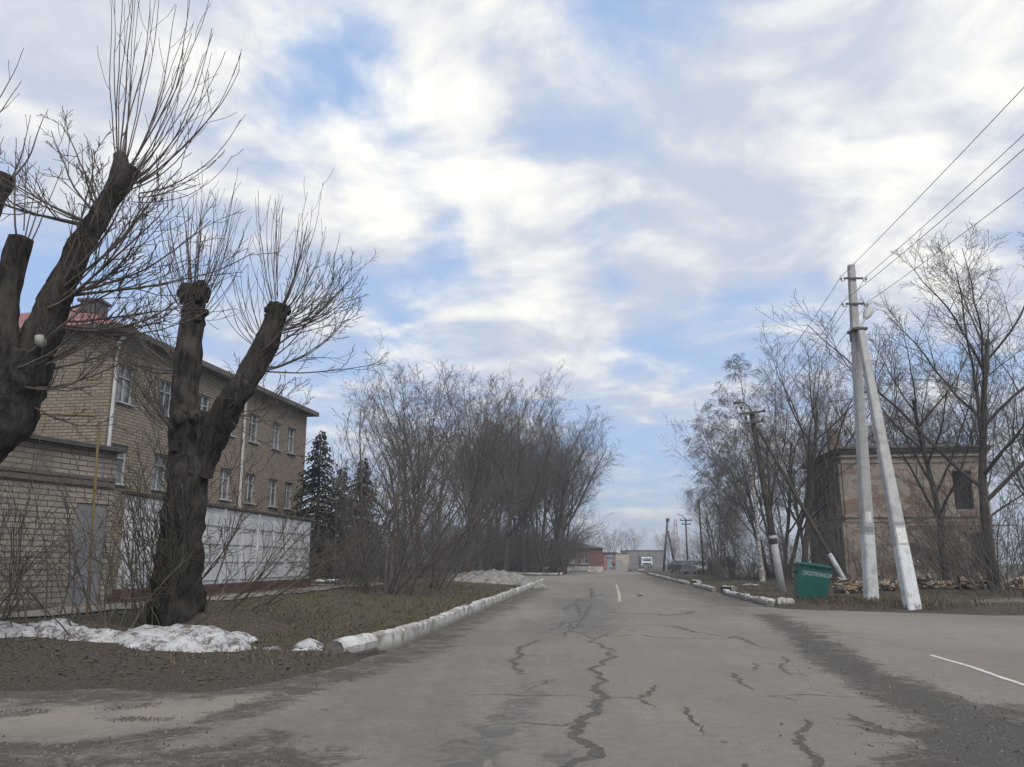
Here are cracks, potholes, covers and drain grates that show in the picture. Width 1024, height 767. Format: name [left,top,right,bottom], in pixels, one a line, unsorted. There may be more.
crack [771,694,833,767]
crack [478,588,807,767]
